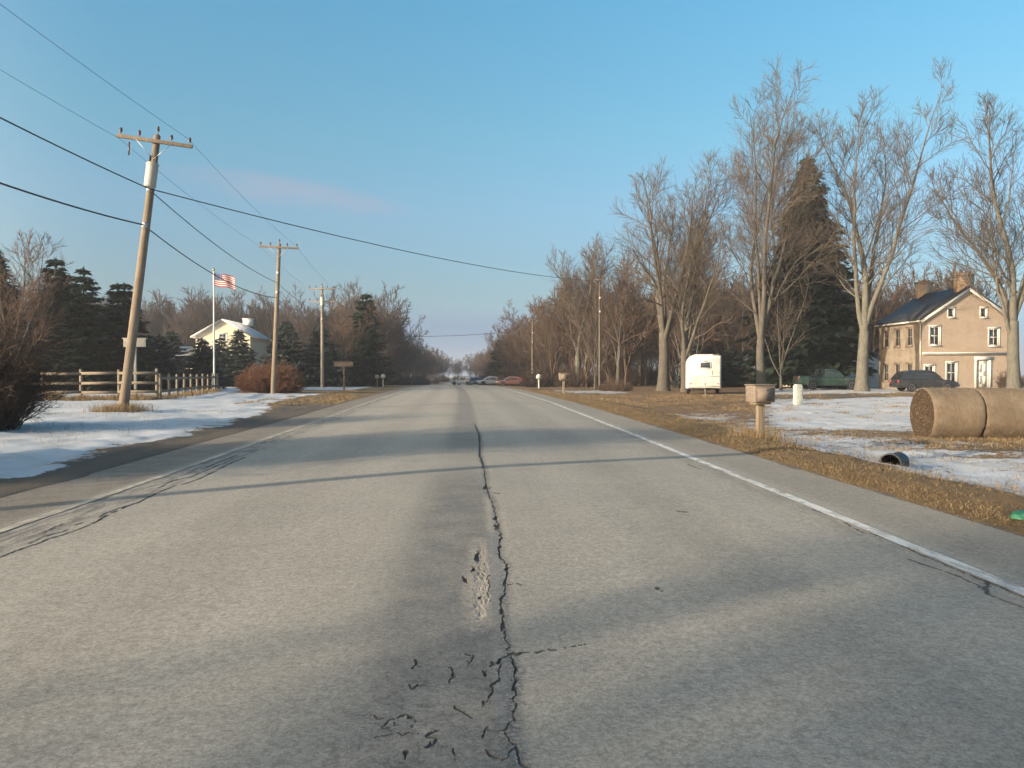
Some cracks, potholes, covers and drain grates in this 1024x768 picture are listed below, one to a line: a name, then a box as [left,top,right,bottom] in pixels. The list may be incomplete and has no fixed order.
crack [901,546,1024,608]
crack [370,424,587,768]
crack [158,455,246,488]
pothole [469,540,491,622]
